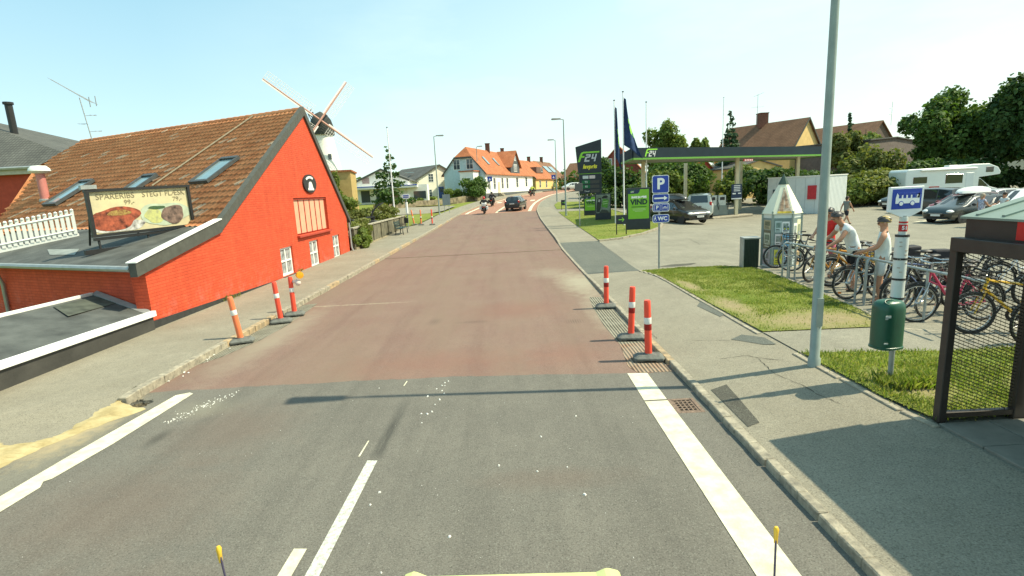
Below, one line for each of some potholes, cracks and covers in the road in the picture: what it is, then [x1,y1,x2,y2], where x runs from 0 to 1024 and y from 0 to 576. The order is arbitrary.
pothole [129,399,153,407]
drain grate [667,398,705,413]
